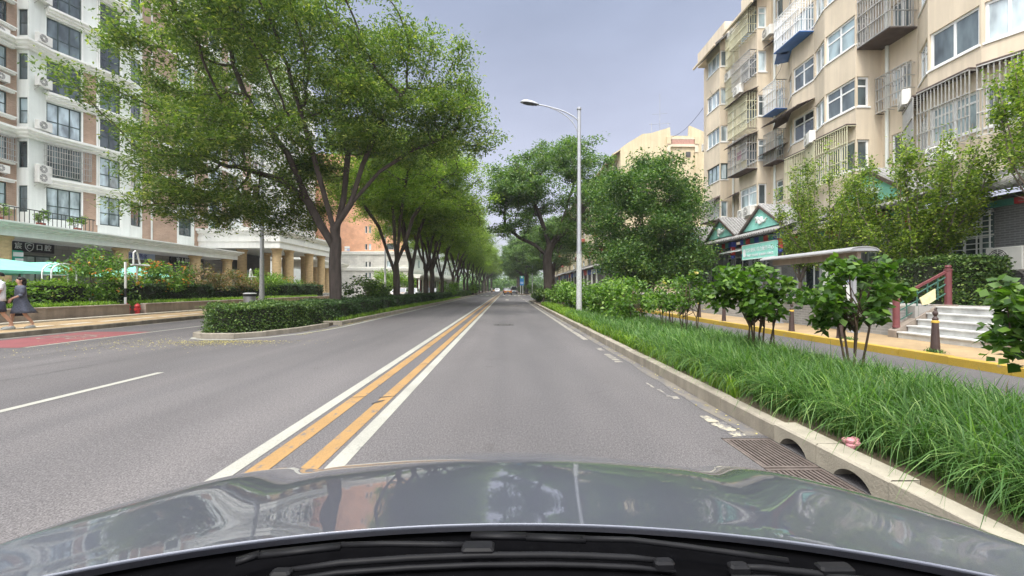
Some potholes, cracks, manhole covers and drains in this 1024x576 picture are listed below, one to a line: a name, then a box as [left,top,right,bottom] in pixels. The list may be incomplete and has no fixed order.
drain grate [722,438,820,469]
drain grate [774,422,841,464]
drain grate [765,468,866,494]
